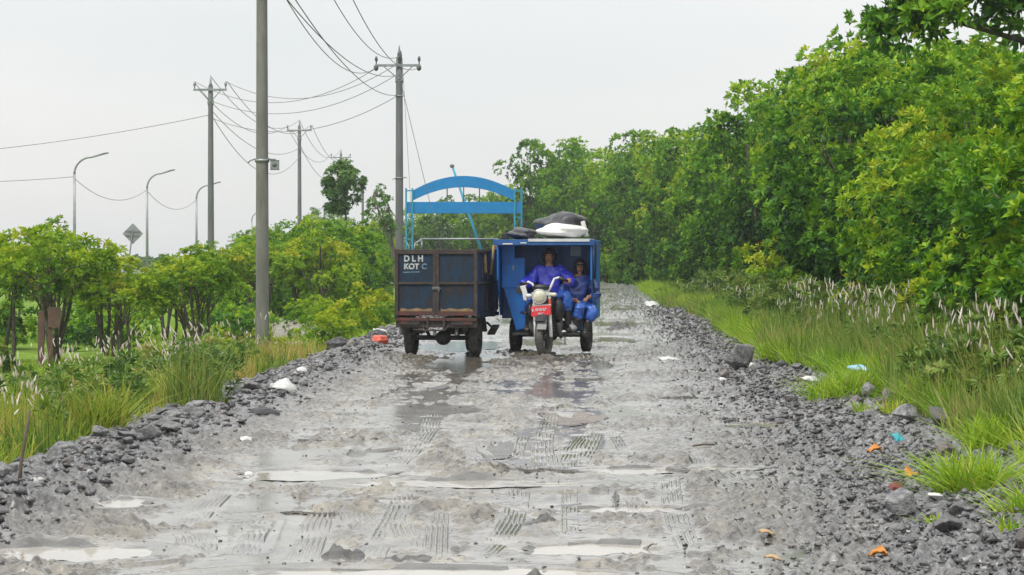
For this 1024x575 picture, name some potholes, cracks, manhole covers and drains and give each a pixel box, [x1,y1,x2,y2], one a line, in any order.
pothole [0,537,153,562]
pothole [232,469,404,482]
